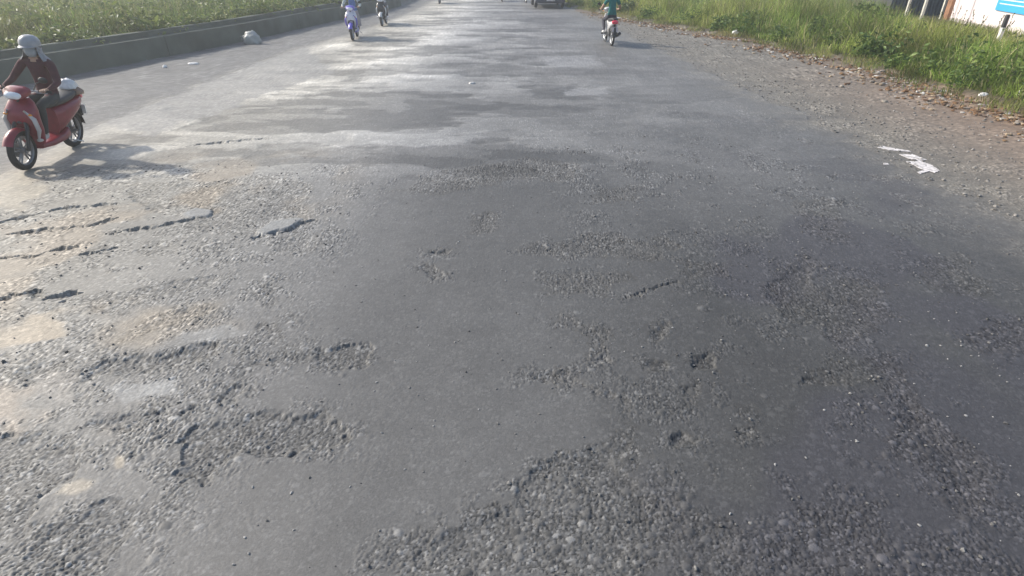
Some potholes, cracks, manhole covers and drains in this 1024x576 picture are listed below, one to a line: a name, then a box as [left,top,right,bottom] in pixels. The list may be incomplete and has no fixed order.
crack [624,279,680,299]
pothole [515,231,682,263]
pothole [117,176,315,237]
crack [193,138,266,146]
crack [0,202,197,260]
pothole [226,339,375,382]
pothole [170,408,354,490]
pothole [963,312,1024,356]
pothole [689,351,722,374]
pothole [358,417,762,576]
